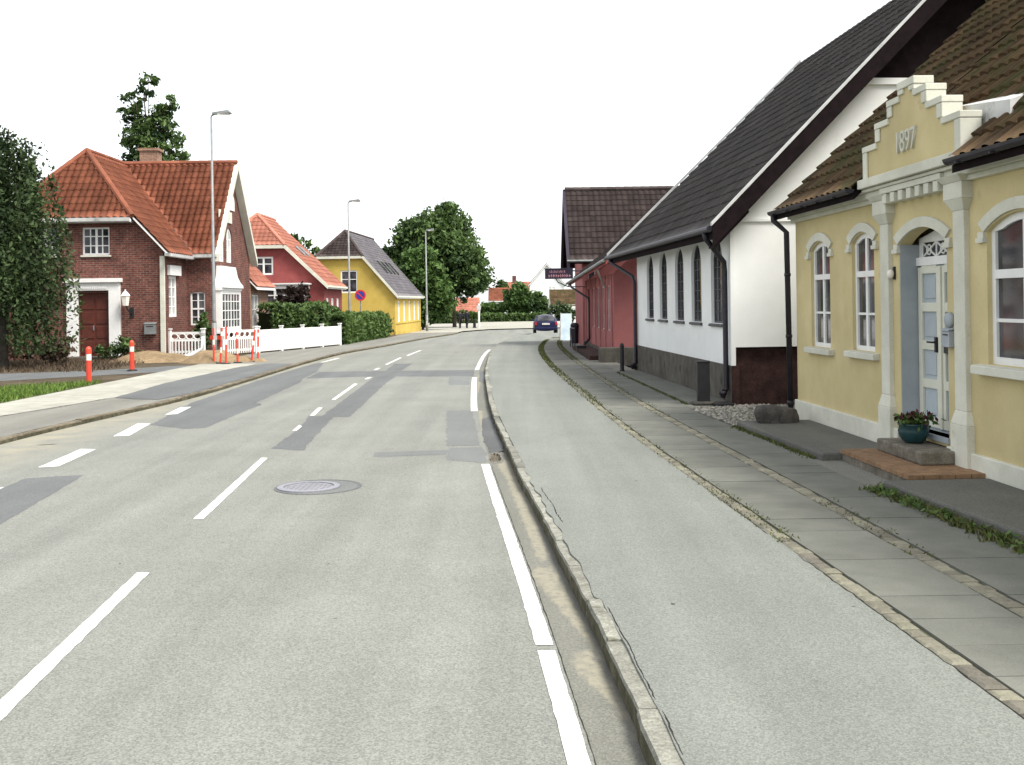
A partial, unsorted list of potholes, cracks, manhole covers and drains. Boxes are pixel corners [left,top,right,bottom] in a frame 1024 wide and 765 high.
manhole cover [274,479,362,495]
pothole [487,452,504,463]
crack [662,711,683,754]
